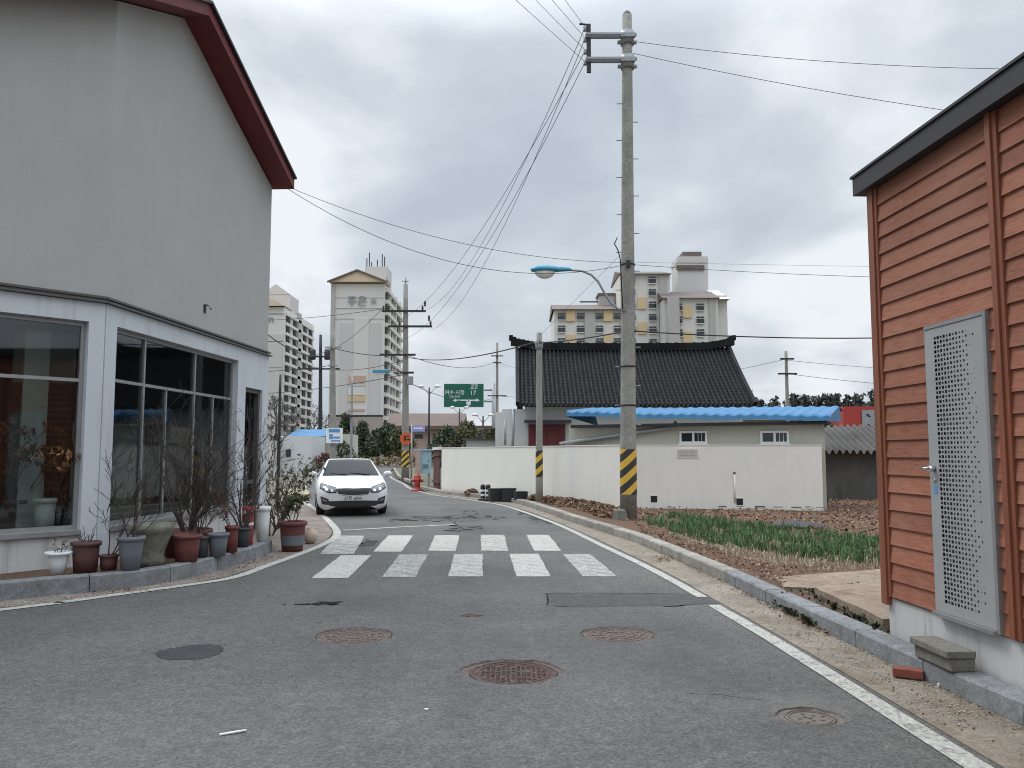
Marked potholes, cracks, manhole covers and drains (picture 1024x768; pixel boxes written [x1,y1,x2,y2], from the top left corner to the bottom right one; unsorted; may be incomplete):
manhole cover [314,627,393,645]
manhole cover [775,706,847,727]
manhole cover [460,659,565,685]
crack [391,510,553,532]
manhole cover [580,626,656,642]
